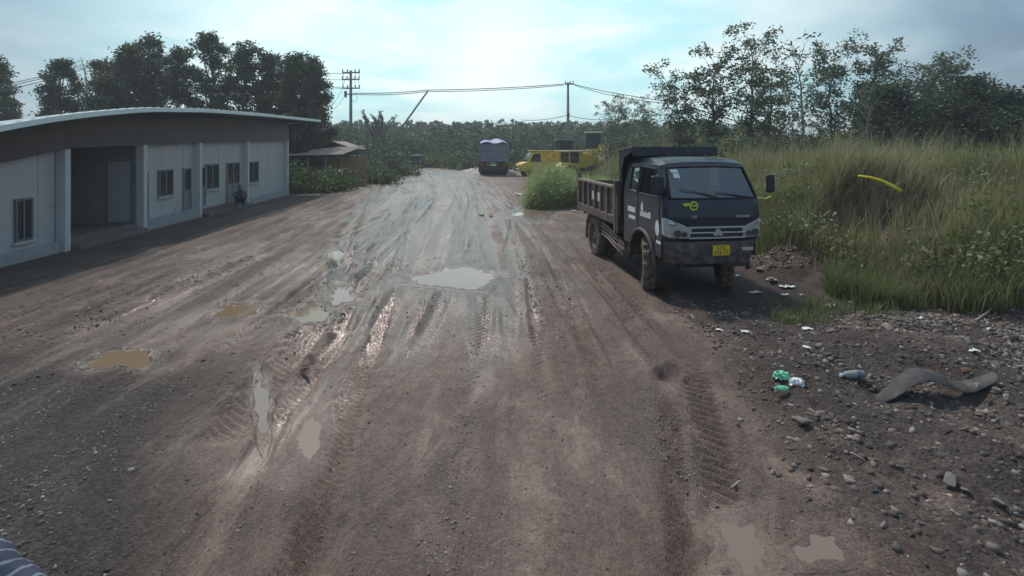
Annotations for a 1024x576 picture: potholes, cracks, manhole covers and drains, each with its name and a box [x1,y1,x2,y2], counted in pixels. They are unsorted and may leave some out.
pothole [392,262,517,293]
pothole [75,345,160,371]
pothole [323,248,361,262]
pothole [275,300,335,325]
pothole [205,301,264,320]
